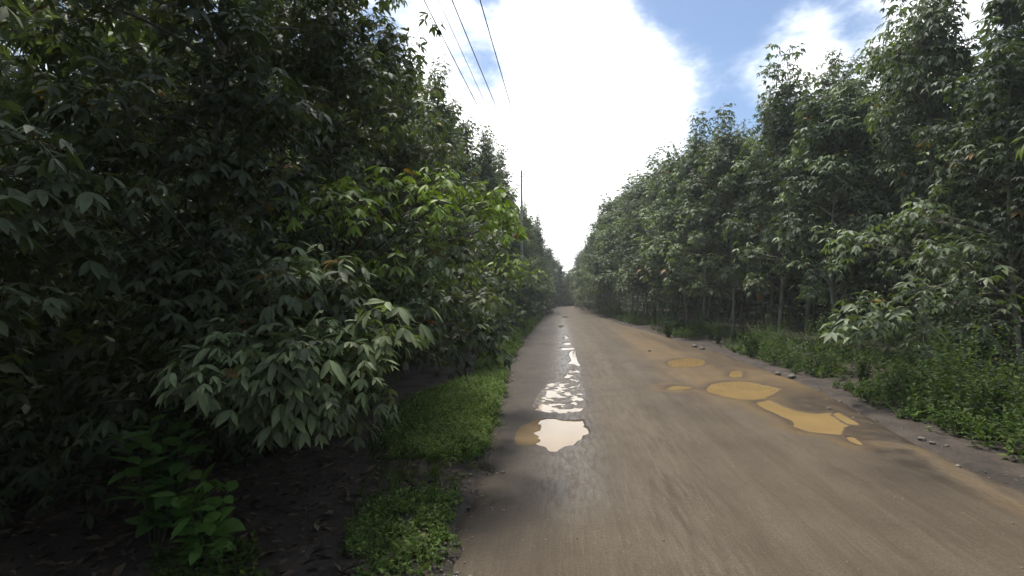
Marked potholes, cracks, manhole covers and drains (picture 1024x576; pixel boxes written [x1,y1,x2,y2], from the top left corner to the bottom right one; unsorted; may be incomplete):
pothole [515,418,591,452]
pothole [665,358,706,367]
pothole [754,399,850,435]
pothole [832,412,859,425]
pothole [533,366,586,413]
pothole [567,350,580,366]
pothole [703,381,782,400]
